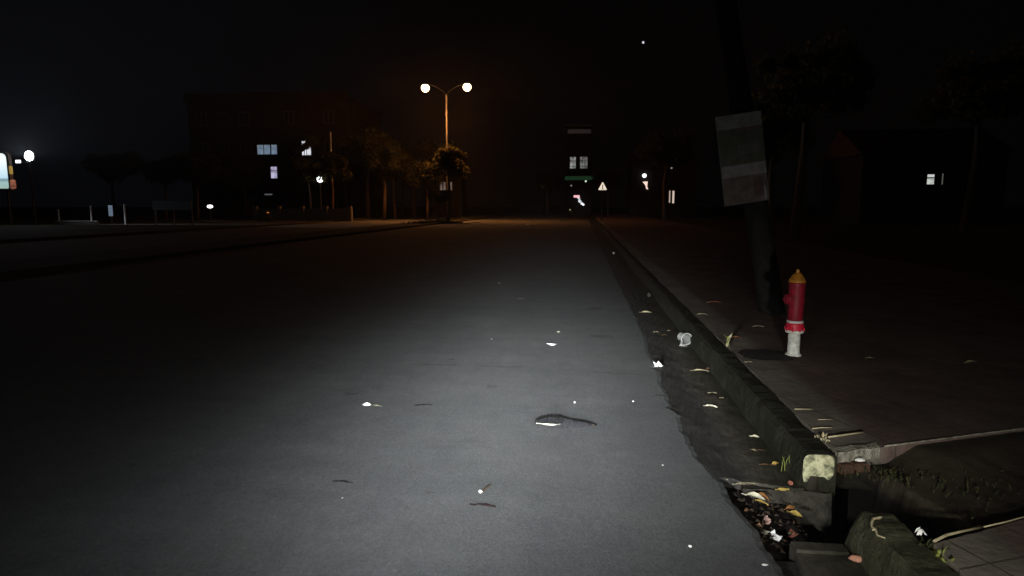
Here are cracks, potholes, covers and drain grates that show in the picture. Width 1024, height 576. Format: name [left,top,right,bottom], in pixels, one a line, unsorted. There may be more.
pothole [535,414,597,429]
